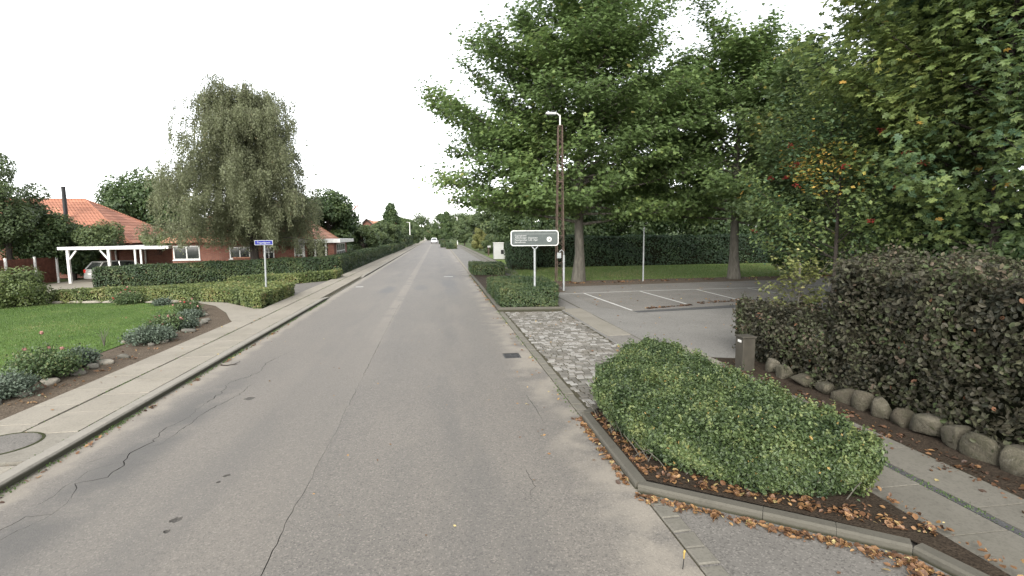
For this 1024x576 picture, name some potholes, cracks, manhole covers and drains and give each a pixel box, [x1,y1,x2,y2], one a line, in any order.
manhole cover [0,432,46,455]
crack [1,352,289,537]
